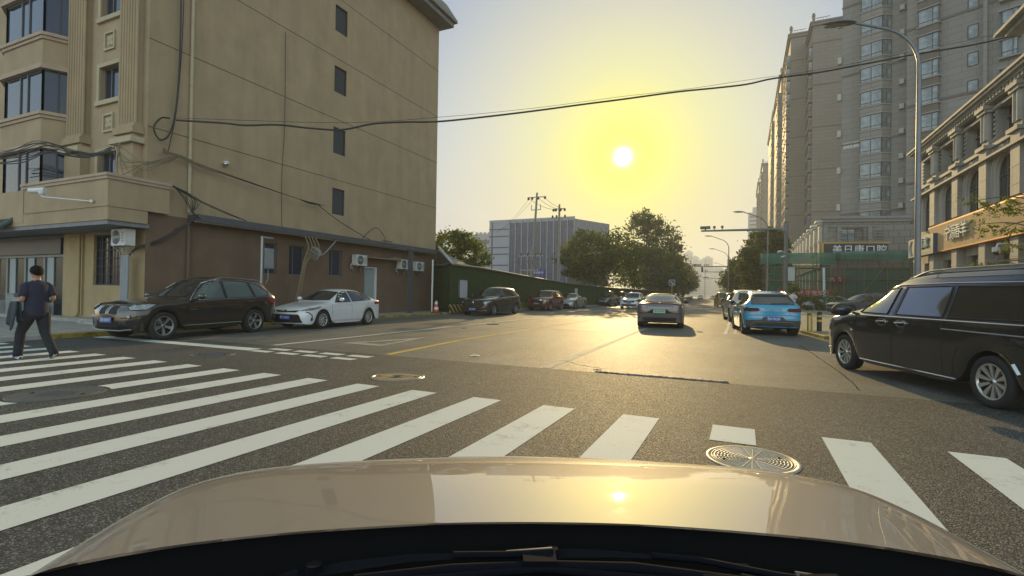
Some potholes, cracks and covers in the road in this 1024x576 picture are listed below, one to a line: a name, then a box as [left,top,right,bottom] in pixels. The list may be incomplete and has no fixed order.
manhole cover [370,372,425,382]
manhole cover [706,446,803,474]
manhole cover [3,386,107,402]
